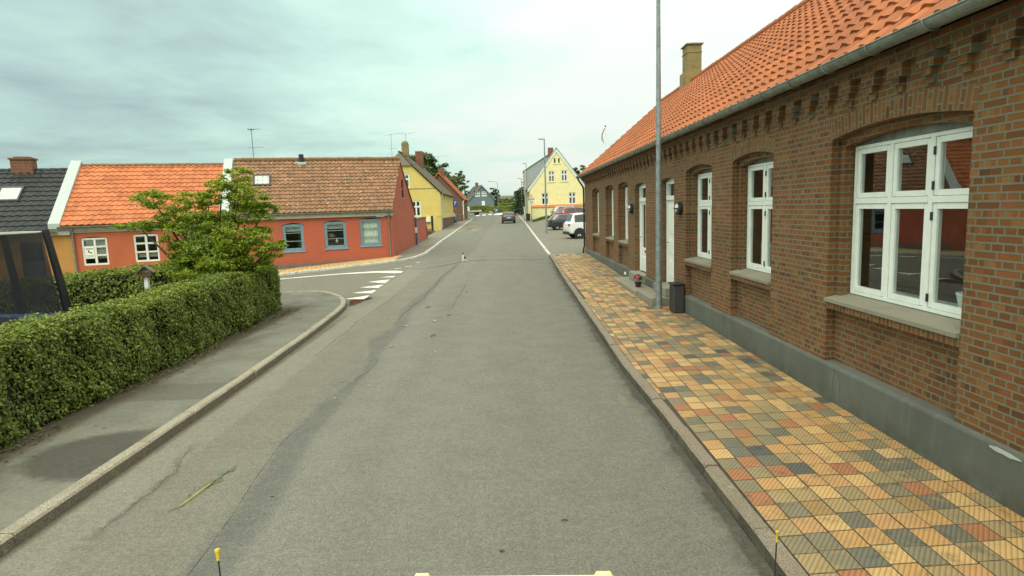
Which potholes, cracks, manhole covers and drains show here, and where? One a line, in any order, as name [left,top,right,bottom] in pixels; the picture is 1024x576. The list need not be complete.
crack [97,453,187,533]
crack [318,256,544,354]
